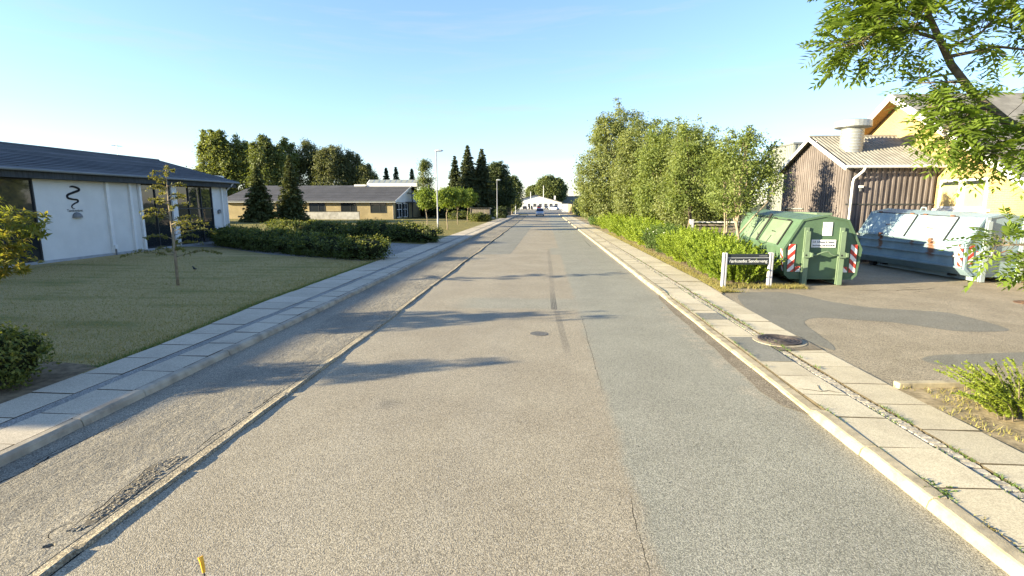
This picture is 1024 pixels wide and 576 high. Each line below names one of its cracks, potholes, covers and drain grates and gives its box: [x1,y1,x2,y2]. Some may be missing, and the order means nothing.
crack [629,493,650,575]
manhole cover [753,334,807,347]
crack [1,392,279,540]
